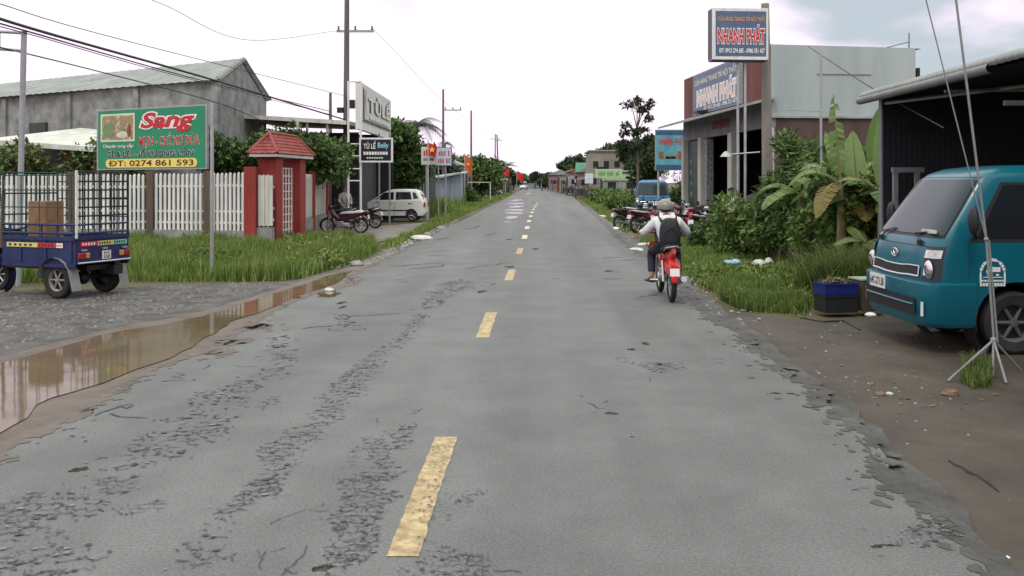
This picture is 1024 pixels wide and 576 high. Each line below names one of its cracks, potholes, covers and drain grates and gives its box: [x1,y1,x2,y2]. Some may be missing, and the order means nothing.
crack [851,435,881,490]
crack [878,514,965,556]
crack [0,237,508,576]
